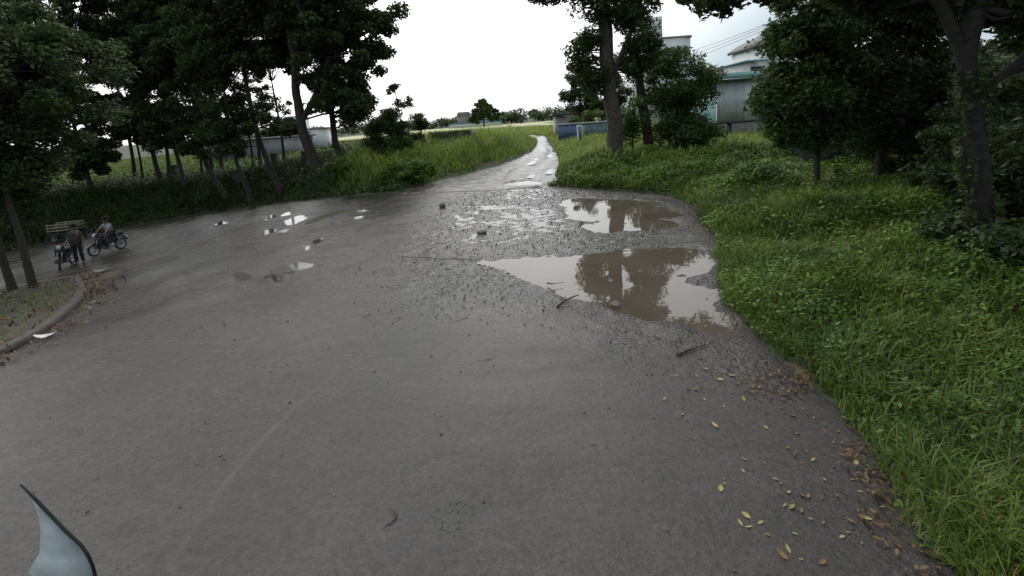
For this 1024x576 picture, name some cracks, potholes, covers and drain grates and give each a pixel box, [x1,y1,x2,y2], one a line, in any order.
pothole [477,241,740,345]
pothole [553,196,697,235]
pothole [261,273,290,286]
